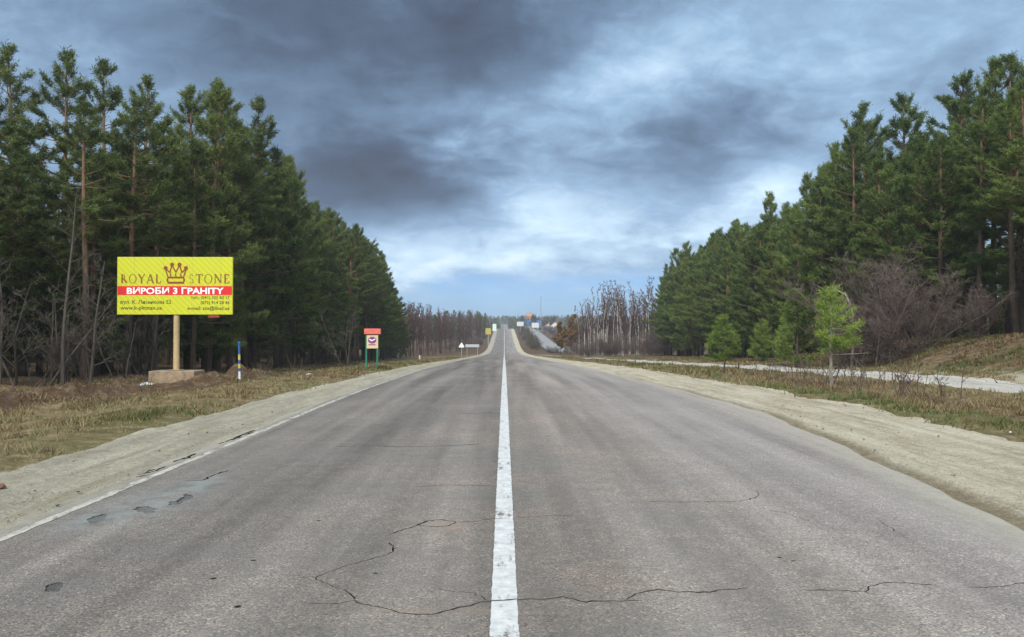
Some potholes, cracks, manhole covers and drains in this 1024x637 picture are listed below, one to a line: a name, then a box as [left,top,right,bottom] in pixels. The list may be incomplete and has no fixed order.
pothole [133,506,158,514]
pothole [168,494,193,505]
pothole [87,514,107,523]
crack [219,430,255,444]
crack [799,582,932,594]
pothole [45,582,63,592]
crack [298,518,744,615]
crack [137,454,228,481]
